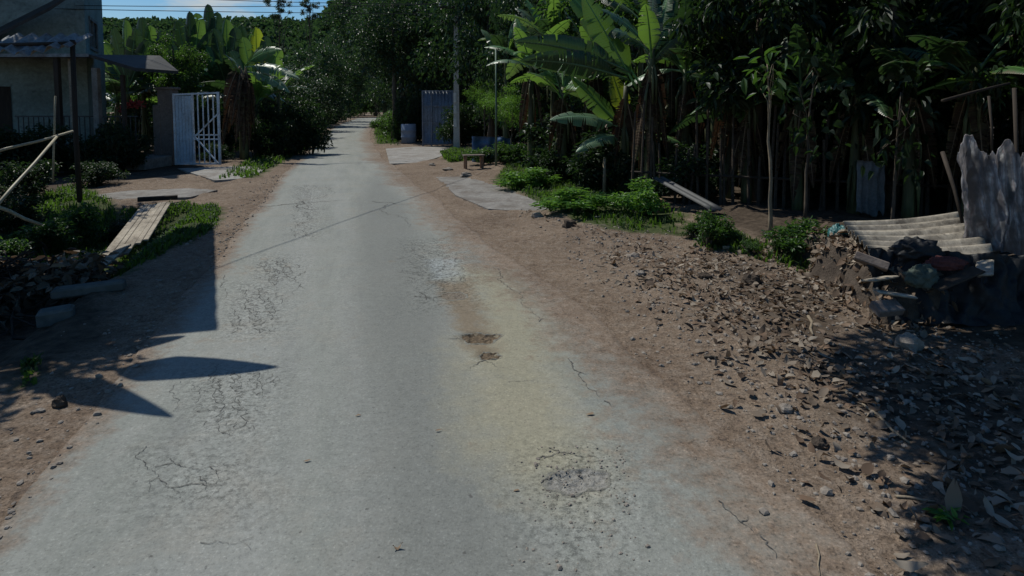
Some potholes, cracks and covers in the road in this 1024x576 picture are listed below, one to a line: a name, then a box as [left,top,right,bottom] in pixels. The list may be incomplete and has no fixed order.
crack [718,500,777,557]
crack [135,446,227,492]
pothole [457,332,504,345]
crack [217,257,306,334]
pothole [478,352,503,360]
crack [262,184,411,236]
